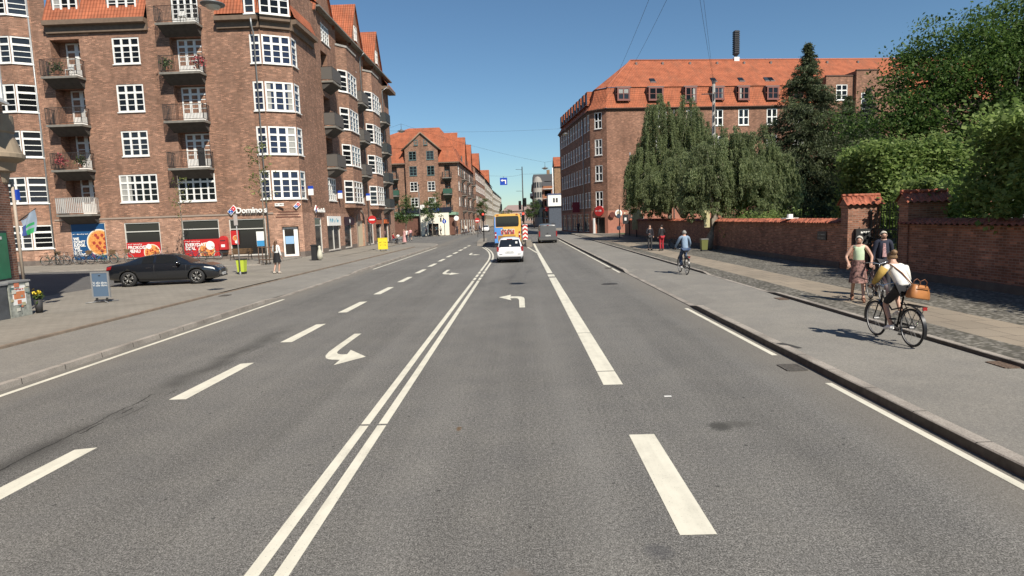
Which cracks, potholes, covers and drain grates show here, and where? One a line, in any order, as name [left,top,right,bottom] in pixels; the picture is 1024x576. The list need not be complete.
crack [1,341,274,470]
